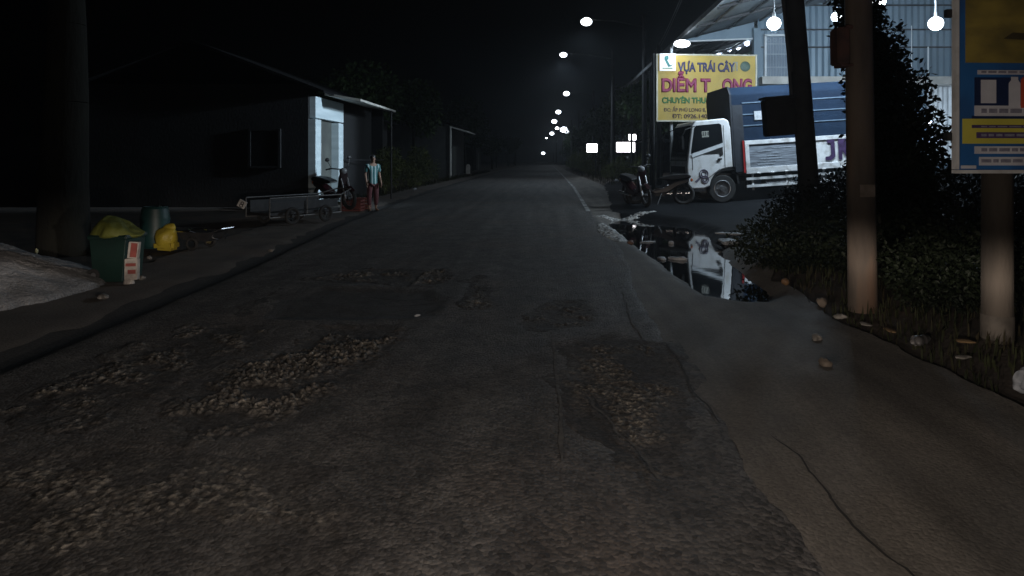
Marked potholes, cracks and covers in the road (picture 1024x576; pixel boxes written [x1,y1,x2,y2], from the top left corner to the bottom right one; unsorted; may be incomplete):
pothole [0,323,281,435]
crack [622,290,643,337]
pothole [541,334,707,478]
crack [552,335,720,482]
crack [770,434,915,576]
pothole [157,321,417,450]
pothole [455,275,502,310]
pothole [517,299,600,332]
pothole [299,267,460,288]
